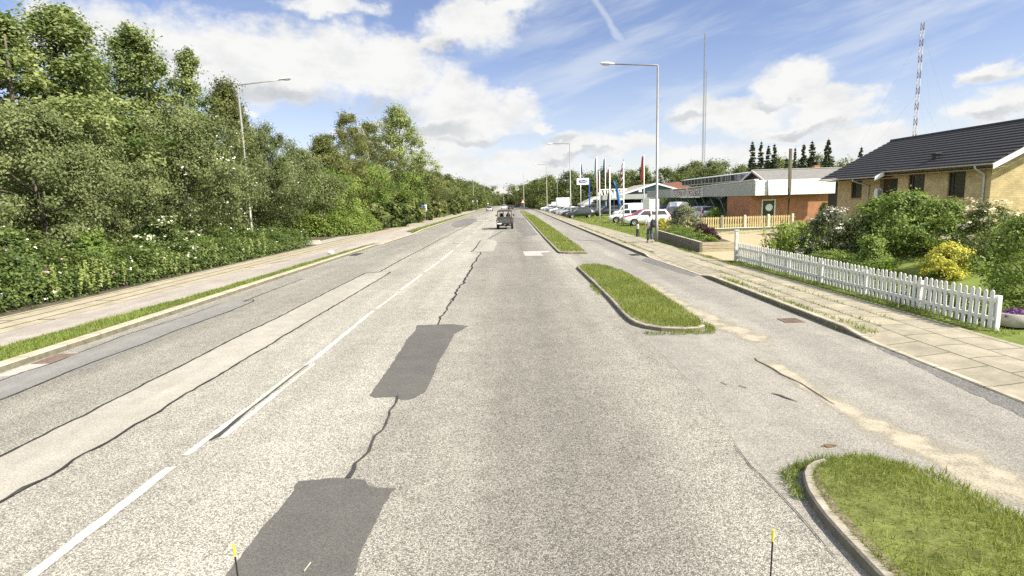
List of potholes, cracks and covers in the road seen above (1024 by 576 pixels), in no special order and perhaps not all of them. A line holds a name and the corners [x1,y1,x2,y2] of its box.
crack [345,395,399,478]
crack [721,358,834,404]
